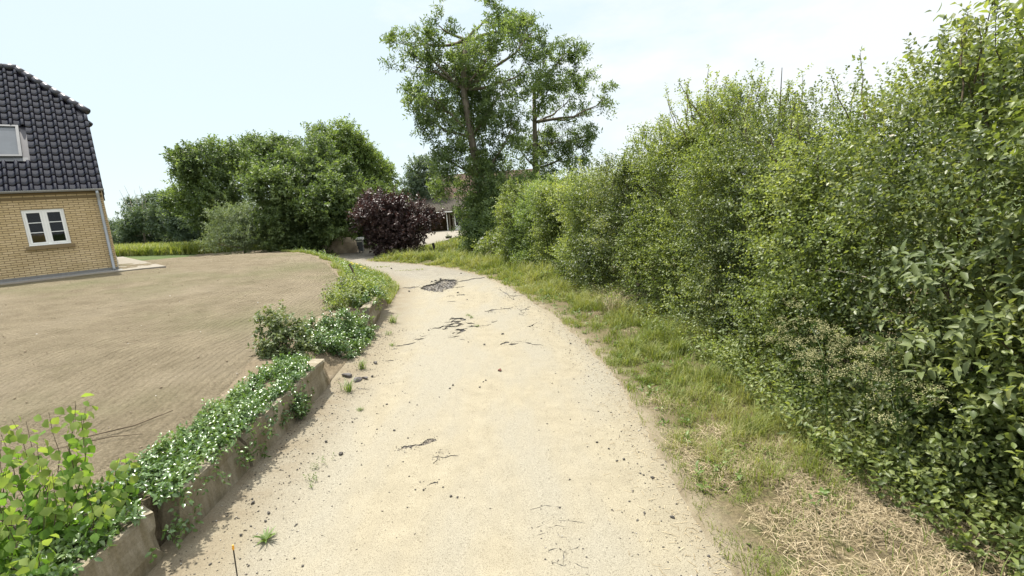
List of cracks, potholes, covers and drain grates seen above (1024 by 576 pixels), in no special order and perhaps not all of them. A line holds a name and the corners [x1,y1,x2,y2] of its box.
pothole [419,279,457,292]
crack [530,505,586,568]
crack [389,277,540,361]
